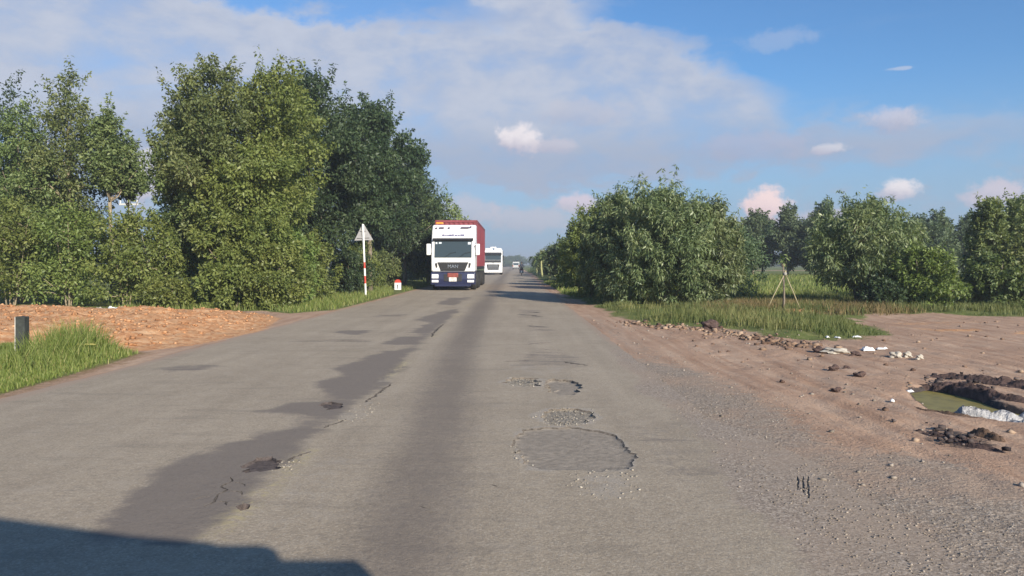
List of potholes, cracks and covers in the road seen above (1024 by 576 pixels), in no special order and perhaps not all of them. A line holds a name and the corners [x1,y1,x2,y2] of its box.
pothole [319,402,343,410]
pothole [544,379,583,395]
crack [191,477,246,507]
pothole [541,408,596,425]
pothole [241,456,282,473]
pothole [511,426,638,472]
crack [365,383,392,402]
pothole [501,377,541,387]
